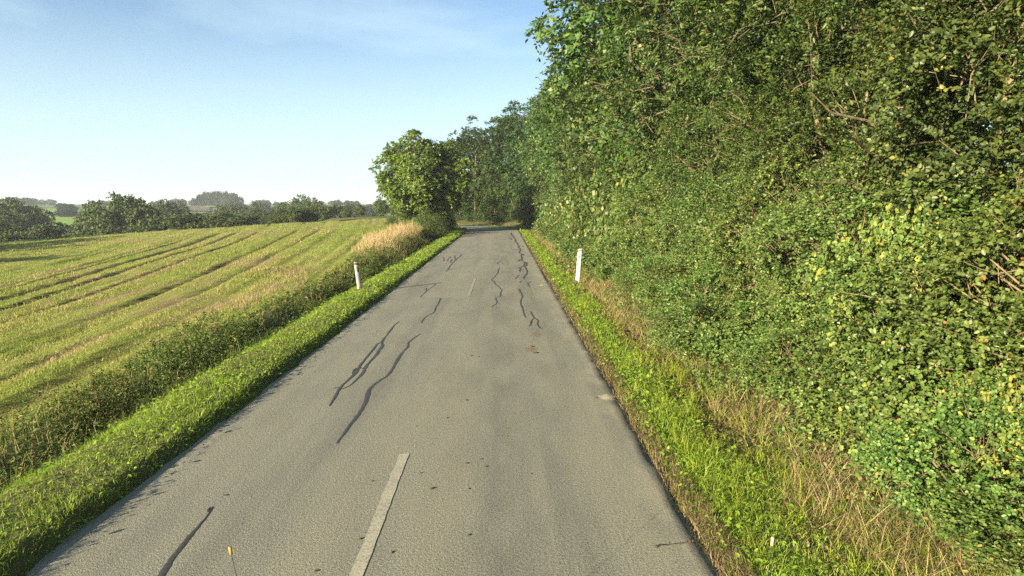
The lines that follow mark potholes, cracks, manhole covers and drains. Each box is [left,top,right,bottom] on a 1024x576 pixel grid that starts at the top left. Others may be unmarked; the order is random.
crack [420,255,461,297]
